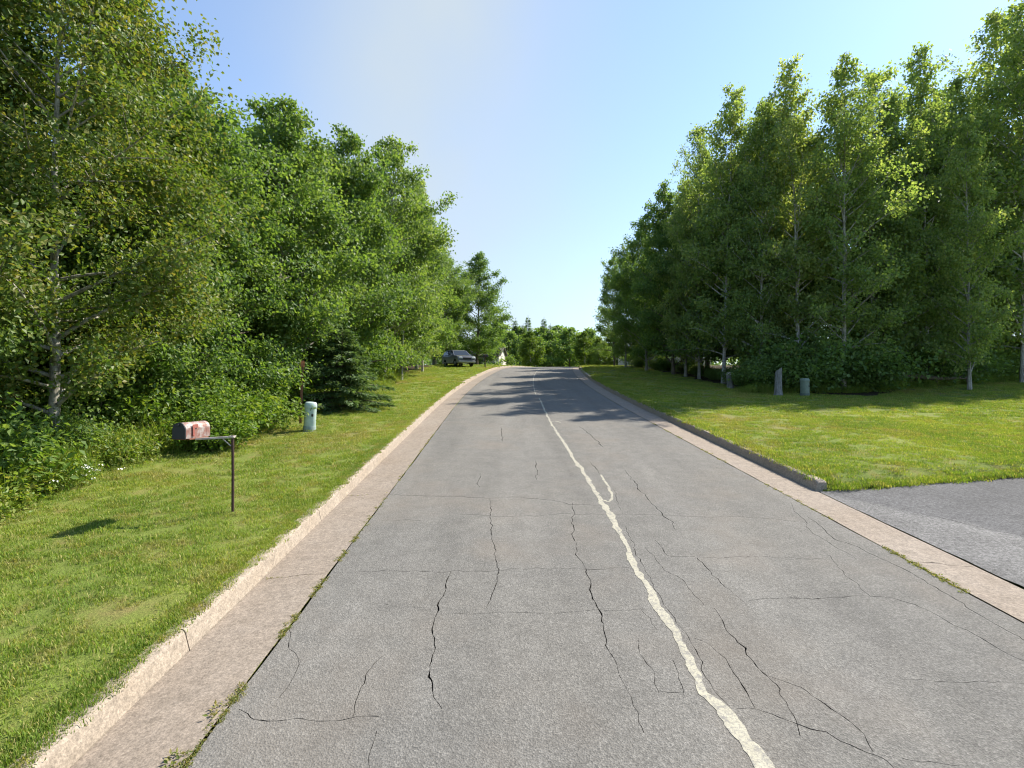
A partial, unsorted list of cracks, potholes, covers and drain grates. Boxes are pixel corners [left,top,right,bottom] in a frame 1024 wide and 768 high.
crack [346,476,1023,768]
crack [239,660,379,768]
